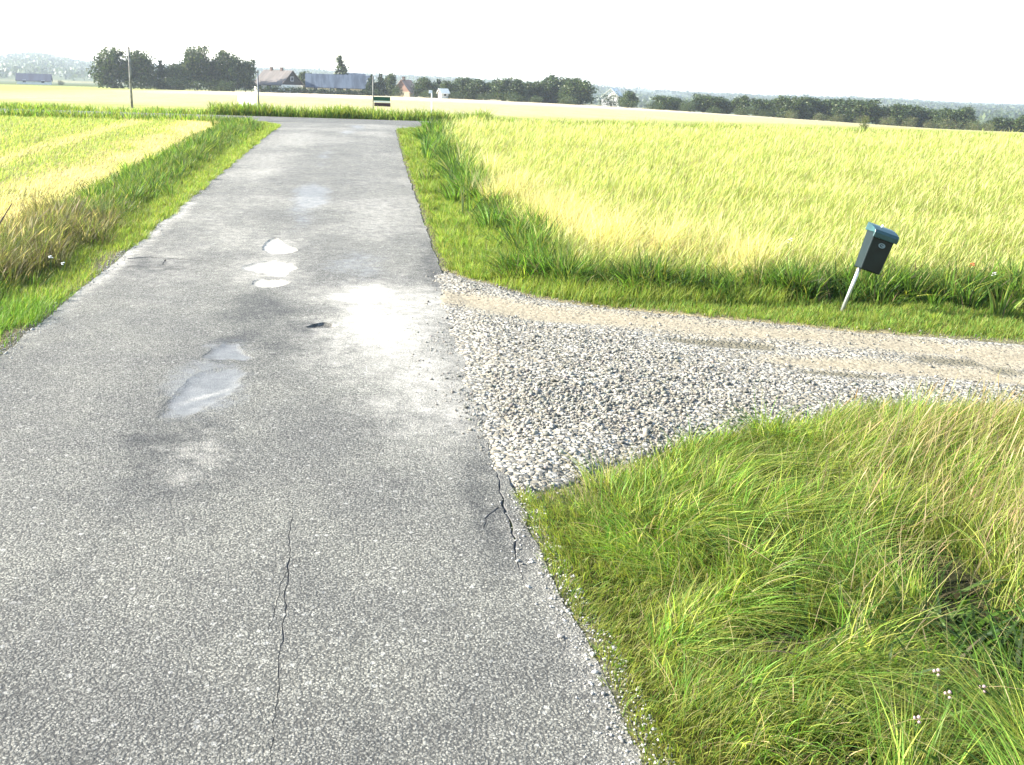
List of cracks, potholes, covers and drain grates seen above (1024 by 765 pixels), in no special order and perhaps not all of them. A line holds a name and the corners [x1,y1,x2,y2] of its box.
crack [470,441,525,584]
crack [127,257,209,270]
crack [267,501,294,765]
